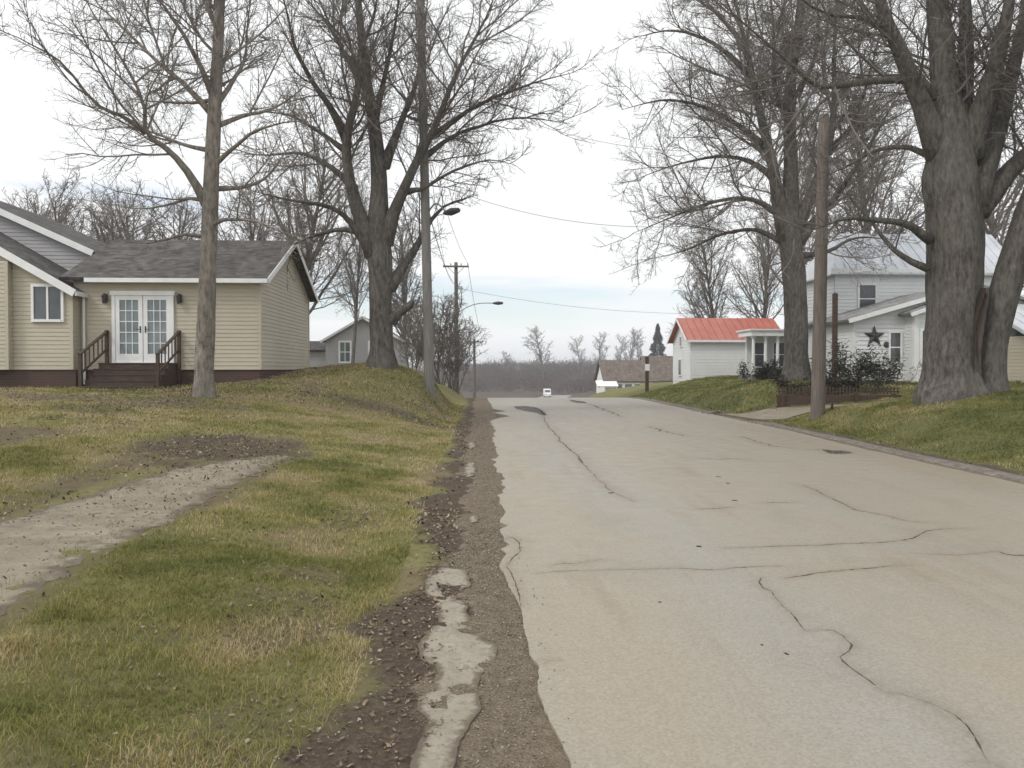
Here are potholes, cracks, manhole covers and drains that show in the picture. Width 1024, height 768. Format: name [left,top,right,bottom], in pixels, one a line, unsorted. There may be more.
crack [507,538,521,606]
crack [544,421,610,490]
crack [695,567,982,751]
